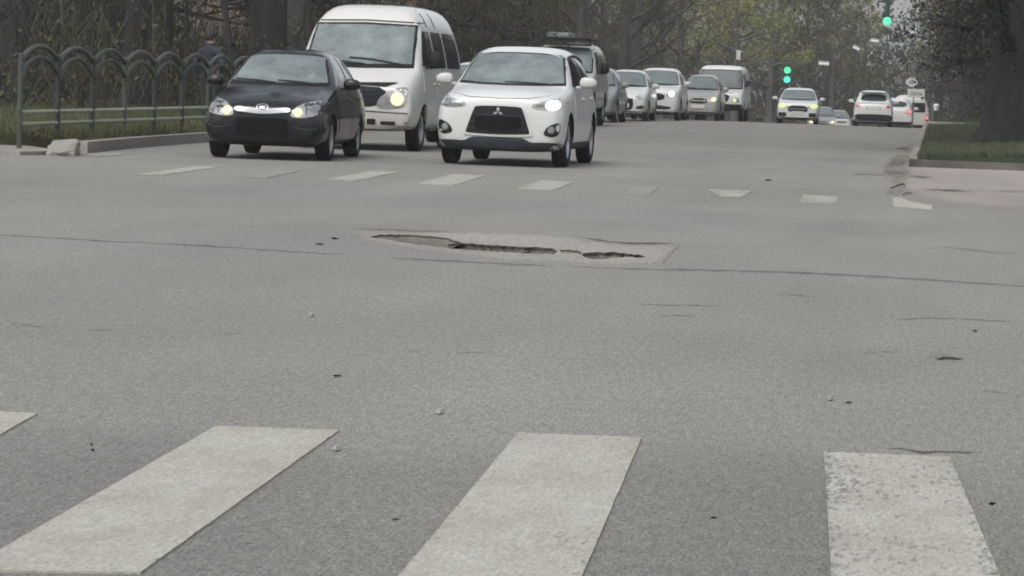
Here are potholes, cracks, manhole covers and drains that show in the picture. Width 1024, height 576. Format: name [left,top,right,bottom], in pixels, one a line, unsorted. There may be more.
pothole [372,235,462,249]
pothole [448,243,557,255]
crack [573,236,686,264]
